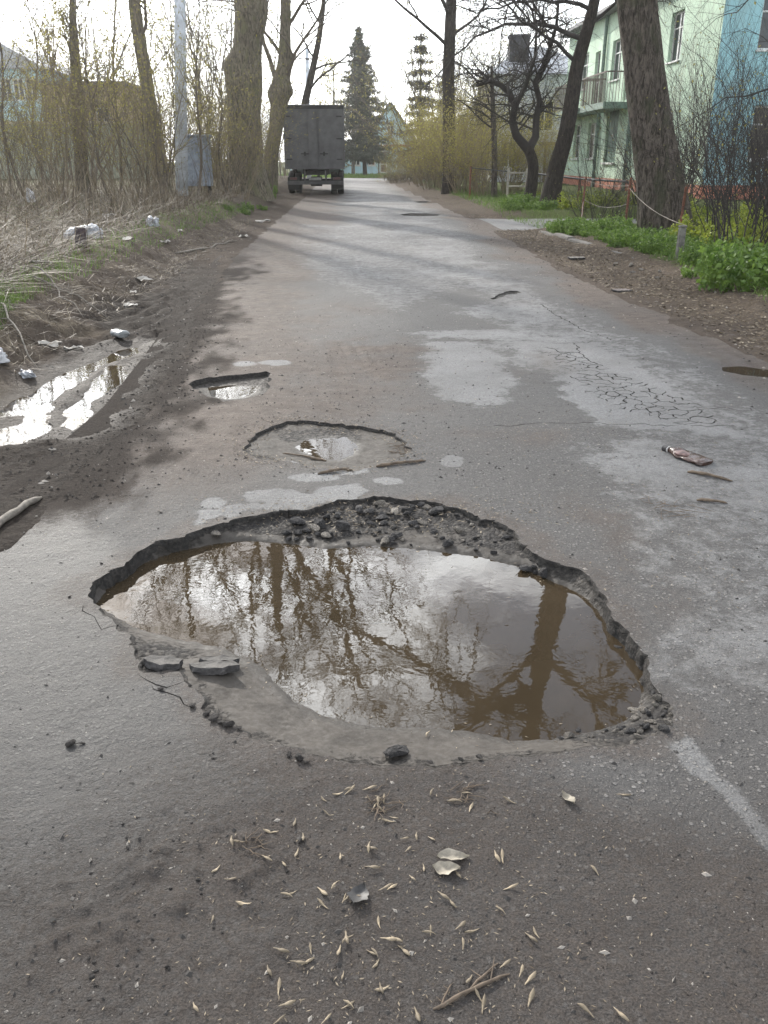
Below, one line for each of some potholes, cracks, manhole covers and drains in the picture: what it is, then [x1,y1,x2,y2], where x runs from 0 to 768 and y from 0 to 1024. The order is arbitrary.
crack [463,304,746,427]
pothole [88,496,674,769]
pothole [188,371,271,402]
pothole [243,420,413,472]
